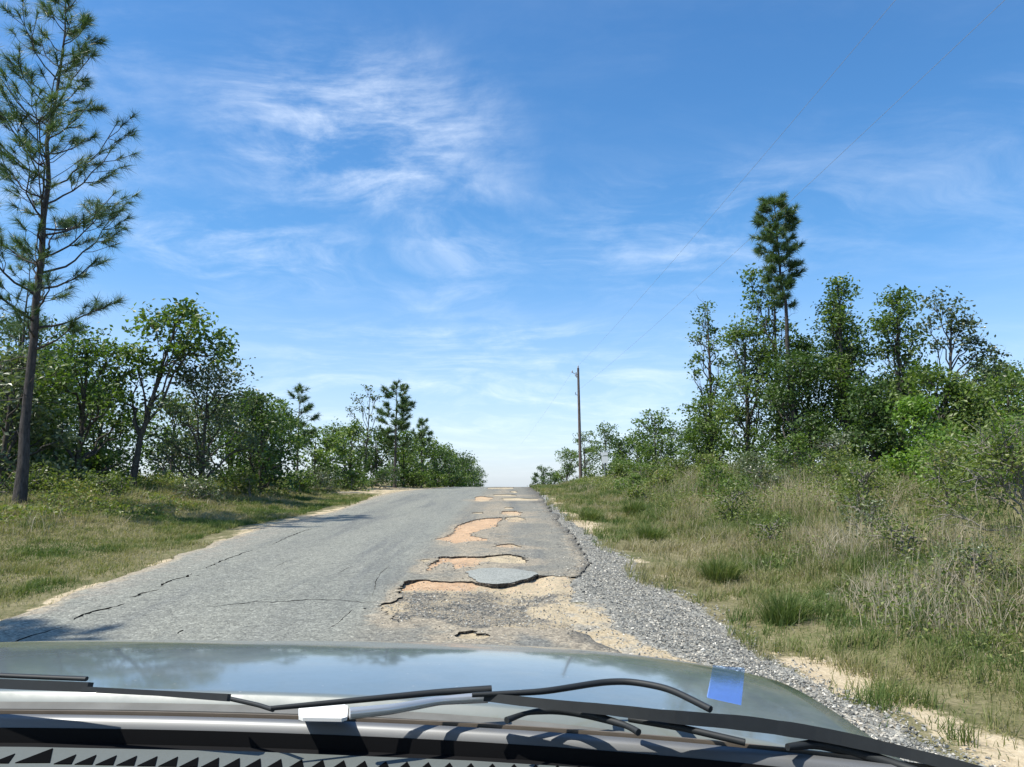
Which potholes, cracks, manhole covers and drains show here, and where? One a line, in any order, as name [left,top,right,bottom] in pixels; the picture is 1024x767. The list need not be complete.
pothole [436,517,503,543]
crack [208,568,387,630]
pothole [379,575,576,630]
crack [15,529,309,642]
pothole [426,554,529,570]
